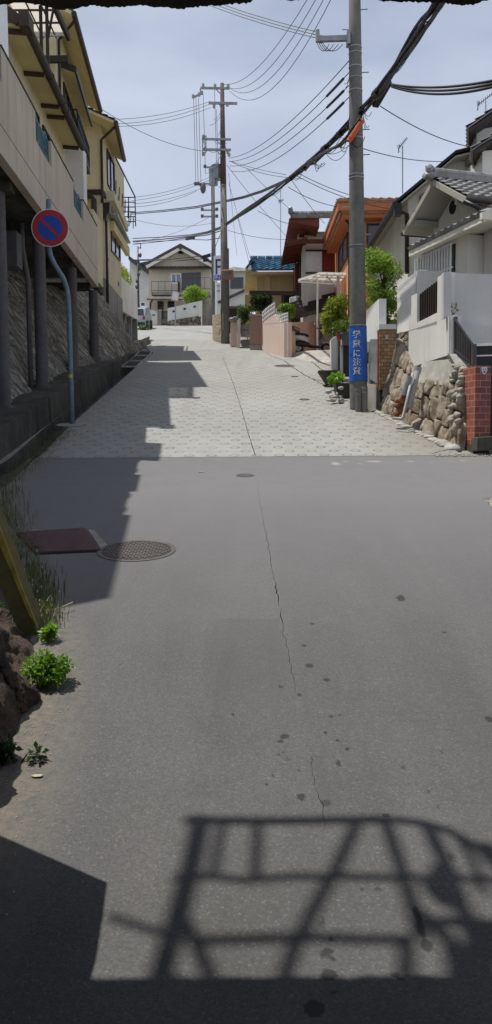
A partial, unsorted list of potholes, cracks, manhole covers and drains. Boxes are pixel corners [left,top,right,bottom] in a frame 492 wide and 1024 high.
crack [261,508,296,690]
manhole cover [17,528,107,555]
manhole cover [97,540,176,562]
